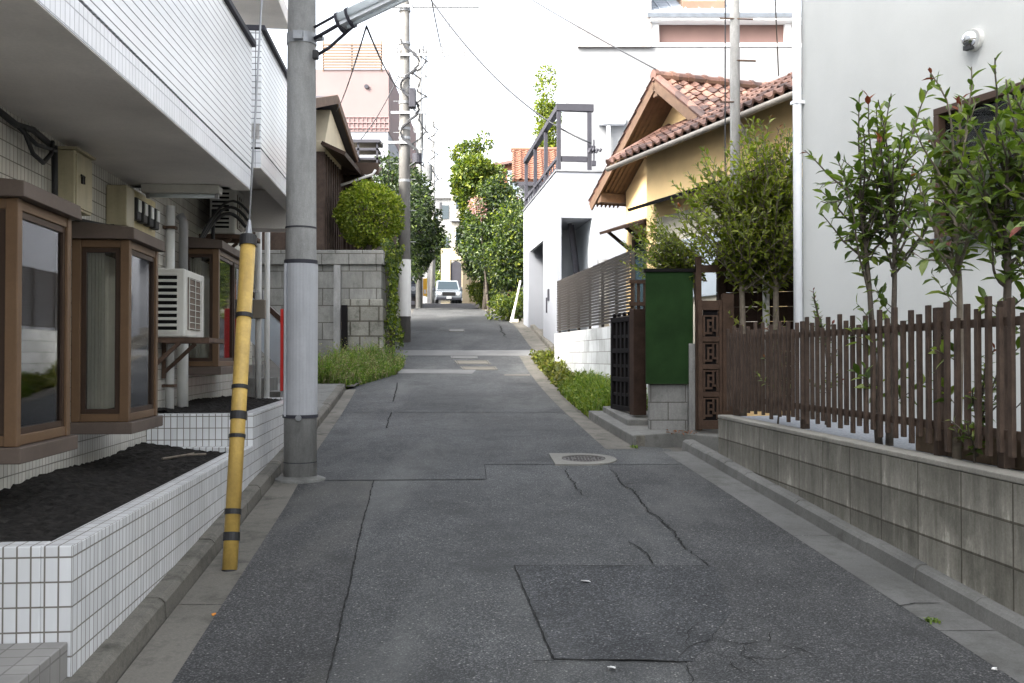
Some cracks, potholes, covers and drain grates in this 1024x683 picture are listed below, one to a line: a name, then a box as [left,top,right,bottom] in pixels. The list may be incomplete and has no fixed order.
manhole cover [549,453,617,466]
crack [326,465,487,683]
crack [513,470,820,683]
